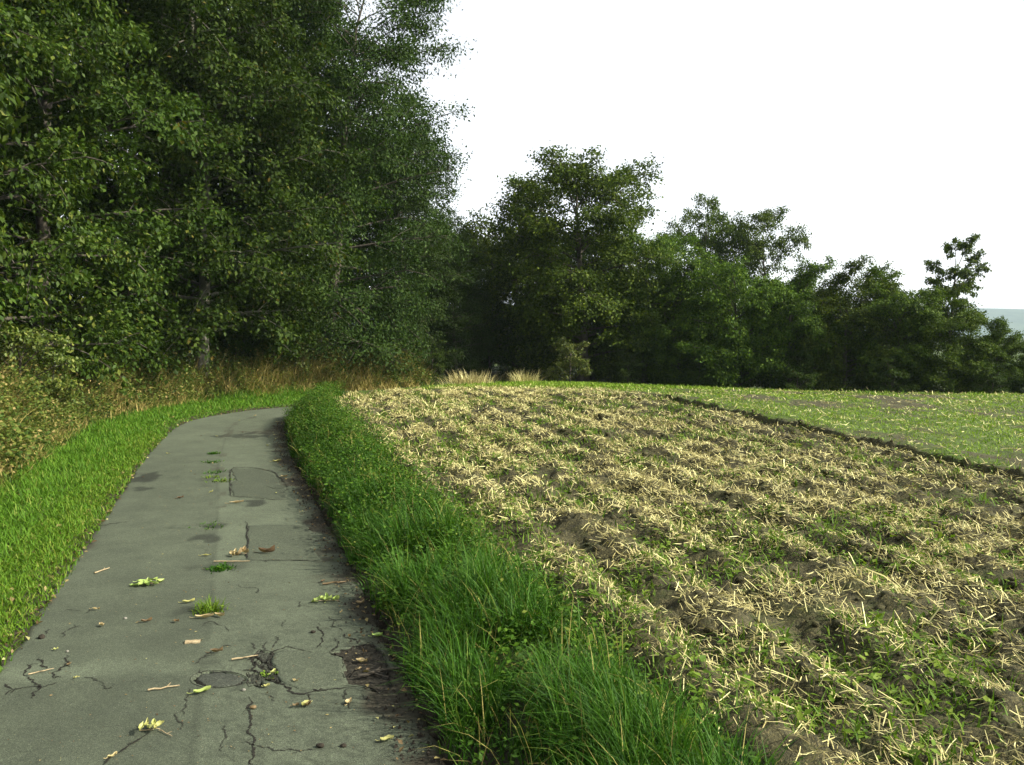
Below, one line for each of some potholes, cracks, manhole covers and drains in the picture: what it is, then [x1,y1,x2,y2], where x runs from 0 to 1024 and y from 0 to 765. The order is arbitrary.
pothole [254,649,281,684]
crack [174,601,395,764]
pothole [329,641,392,694]
crack [4,657,115,698]
pothole [246,671,267,688]
